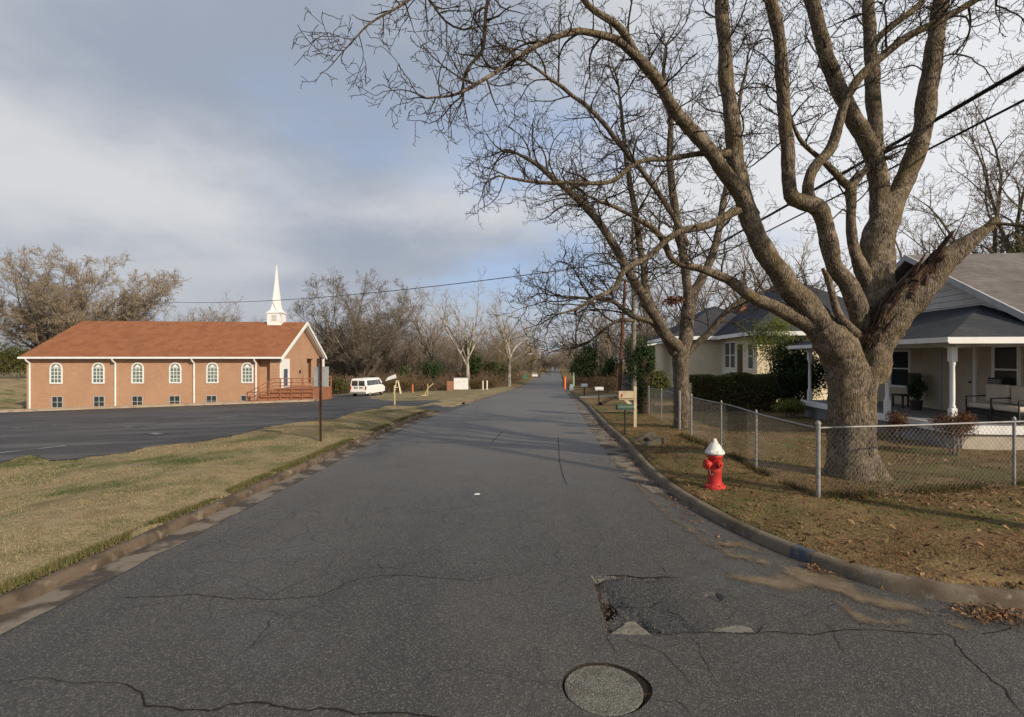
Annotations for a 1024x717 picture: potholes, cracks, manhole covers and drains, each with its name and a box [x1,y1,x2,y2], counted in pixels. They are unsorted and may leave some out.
manhole cover [562,663,653,716]
crack [5,677,438,717]
crack [113,562,525,610]
pothole [591,575,765,635]
crack [941,631,1017,706]
crack [607,633,713,679]
